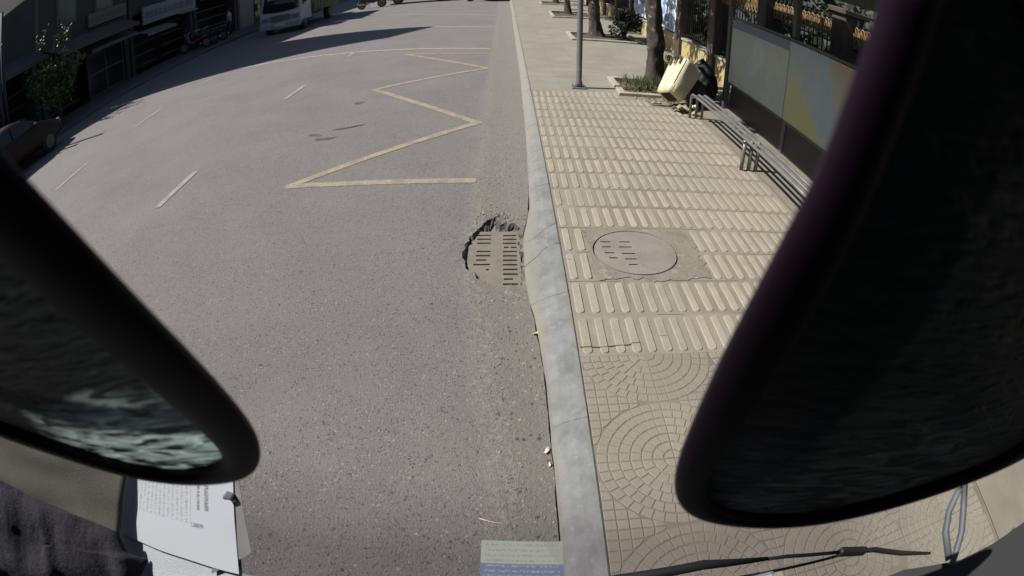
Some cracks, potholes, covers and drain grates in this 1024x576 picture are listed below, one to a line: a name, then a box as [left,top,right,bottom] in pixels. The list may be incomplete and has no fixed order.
drain grate [467,232,522,287]
manhole cover [582,227,711,282]
